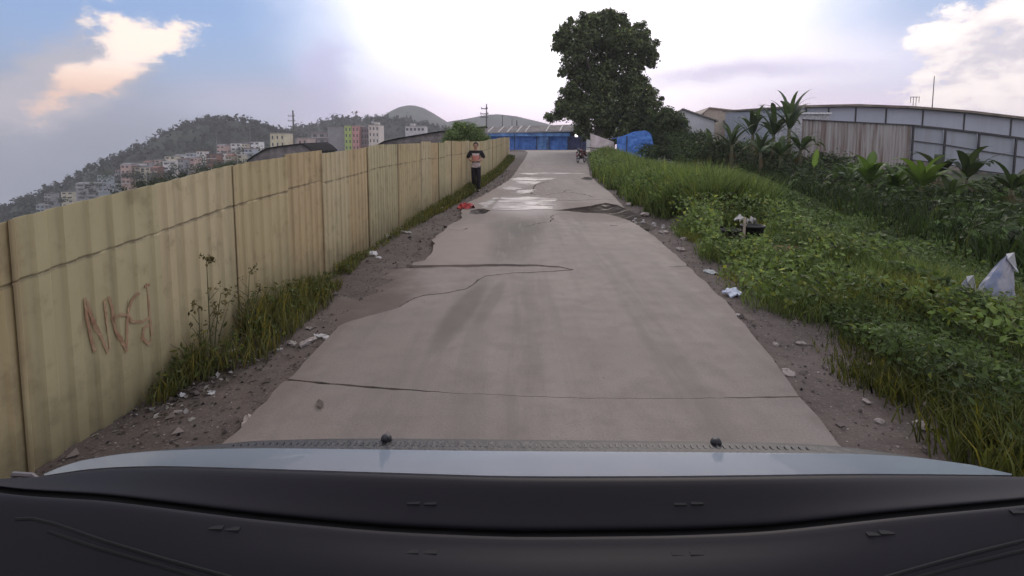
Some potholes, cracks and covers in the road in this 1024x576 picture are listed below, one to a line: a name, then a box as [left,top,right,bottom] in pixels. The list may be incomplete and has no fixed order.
pothole [564,204,651,230]
